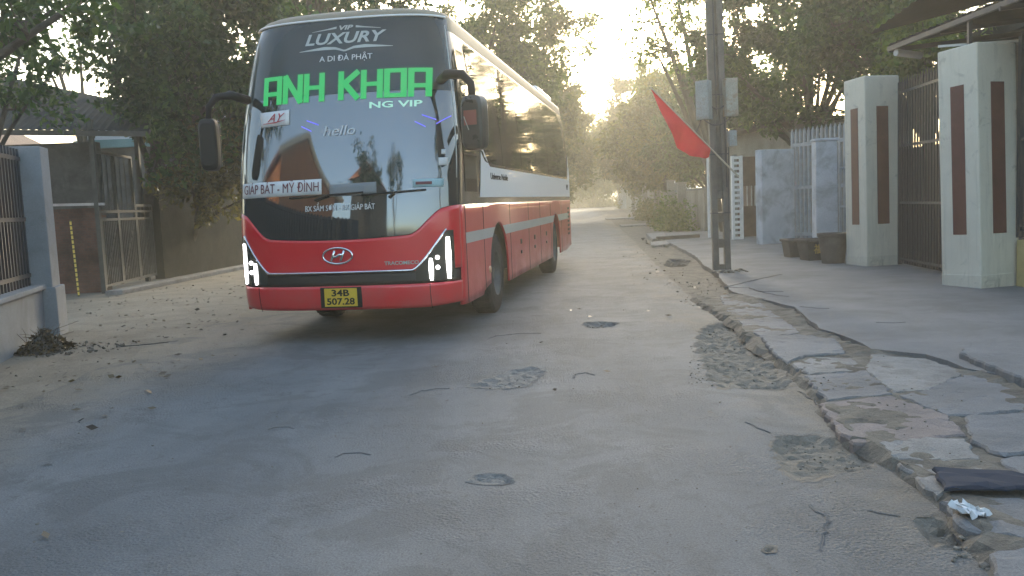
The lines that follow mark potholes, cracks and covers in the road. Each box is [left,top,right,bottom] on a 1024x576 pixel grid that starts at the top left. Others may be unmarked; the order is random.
pothole [465,472,516,485]
pothole [664,258,692,267]
pothole [768,434,877,483]
crack [724,274,782,296]
pothole [463,366,547,389]
pothole [692,321,798,391]
crack [810,504,831,552]
